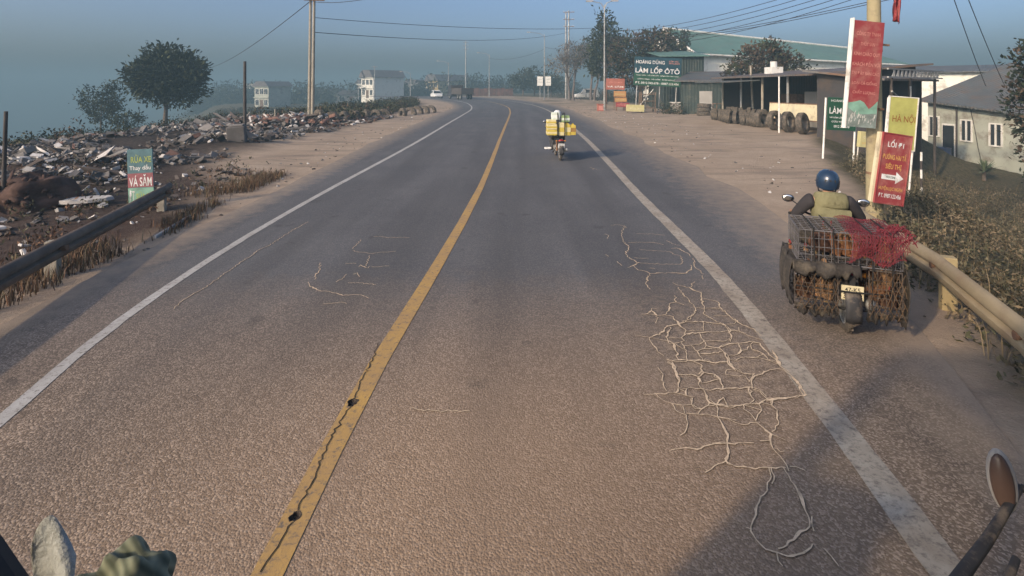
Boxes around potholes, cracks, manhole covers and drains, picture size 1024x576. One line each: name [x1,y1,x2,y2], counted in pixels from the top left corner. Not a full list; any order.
crack [260,344,378,572]
crack [606,225,839,567]
crack [174,222,307,309]
